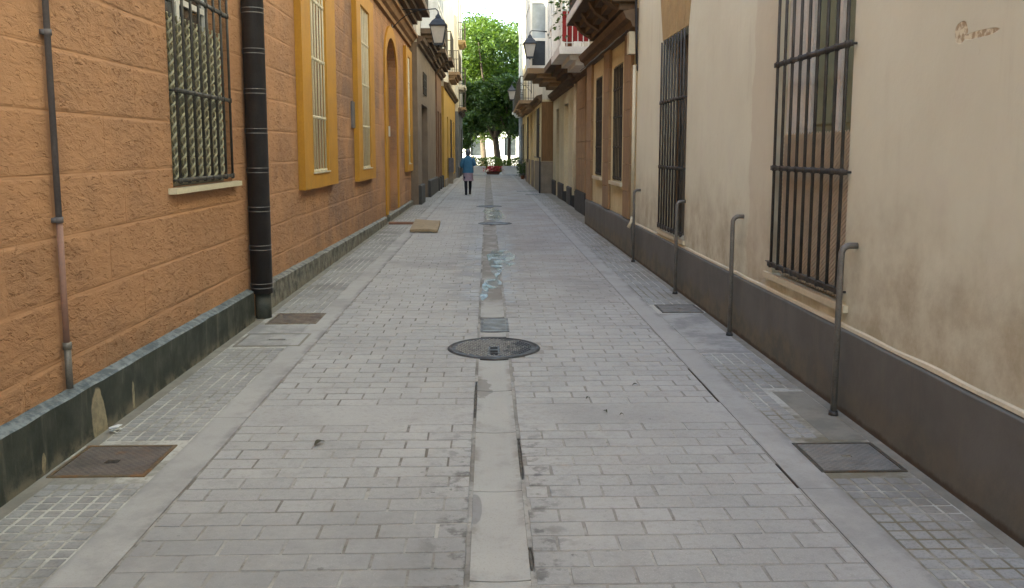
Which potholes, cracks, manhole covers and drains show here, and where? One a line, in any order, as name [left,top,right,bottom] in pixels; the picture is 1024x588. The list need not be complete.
utility cover [792,442,908,479]
utility cover [233,333,311,347]
utility cover [265,313,326,324]
drain grate [481,318,509,333]
manhole cover [447,337,540,361]
utility cover [654,304,704,313]
utility cover [46,445,177,478]
